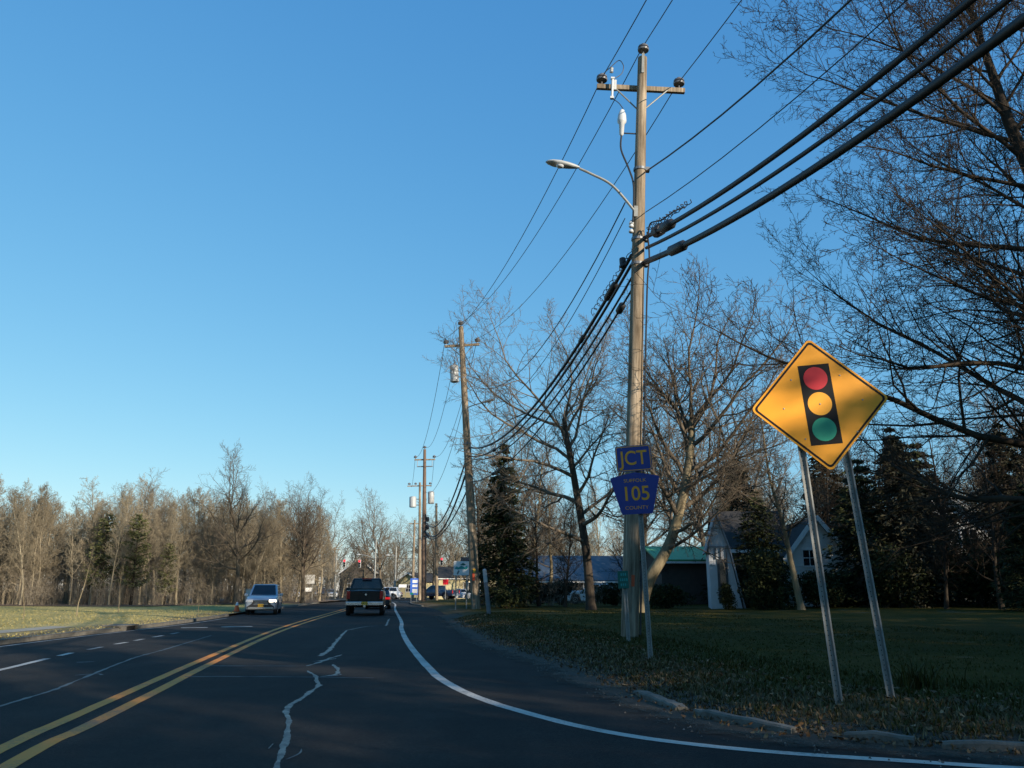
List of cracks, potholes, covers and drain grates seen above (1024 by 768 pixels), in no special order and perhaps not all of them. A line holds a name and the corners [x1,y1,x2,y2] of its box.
crack [185,665,364,678]
